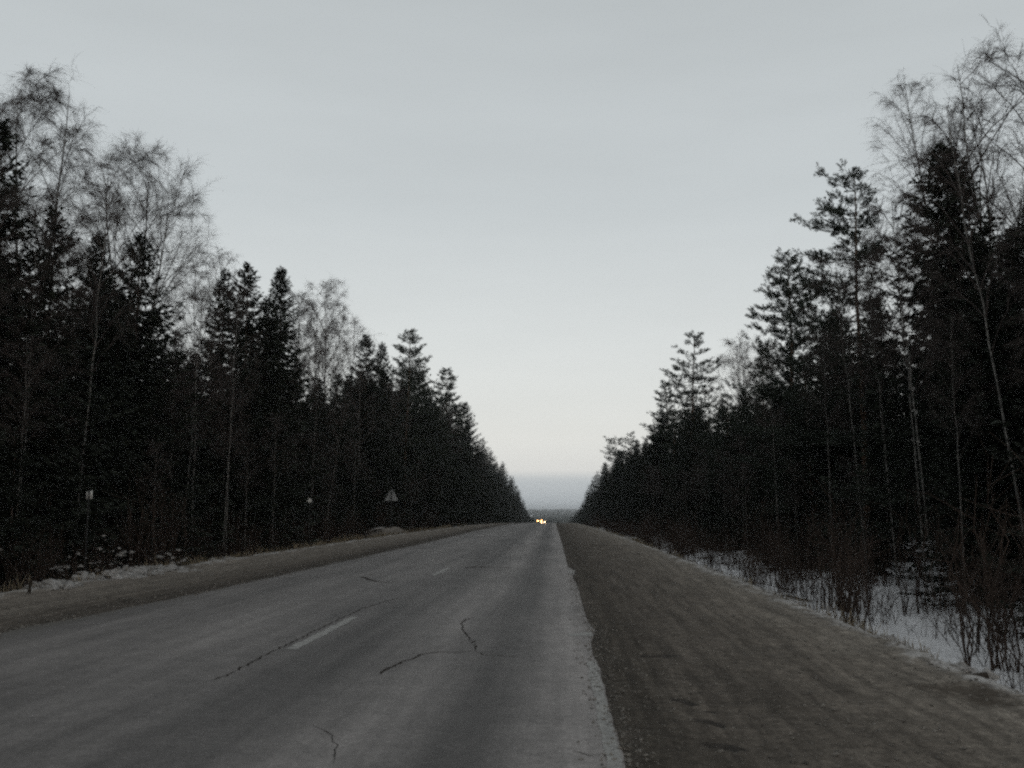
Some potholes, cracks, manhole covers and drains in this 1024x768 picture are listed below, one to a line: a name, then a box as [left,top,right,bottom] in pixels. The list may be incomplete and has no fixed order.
crack [214,597,401,680]
crack [372,617,532,676]
